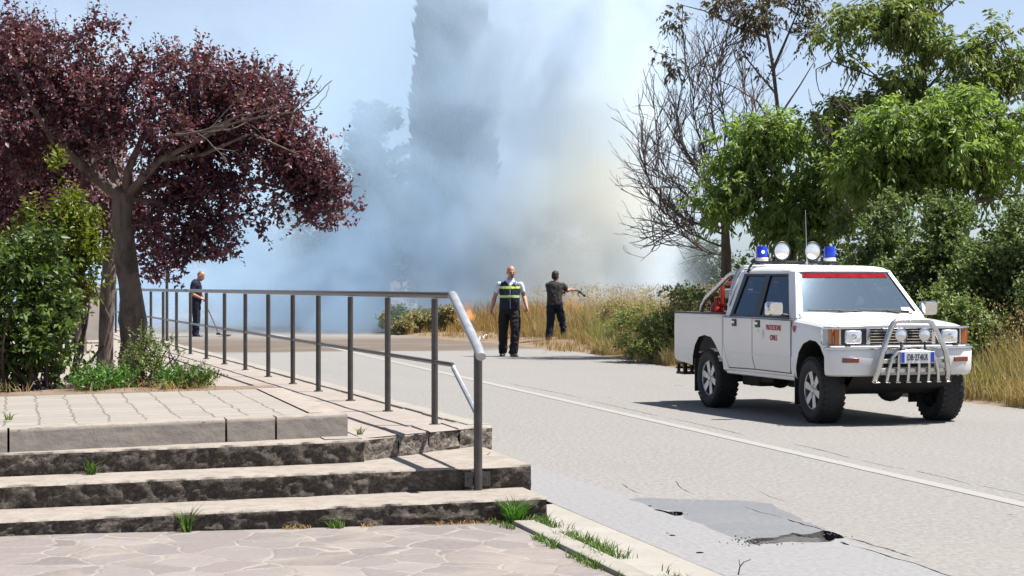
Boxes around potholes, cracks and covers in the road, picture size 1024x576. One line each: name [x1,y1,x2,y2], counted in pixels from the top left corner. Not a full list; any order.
pothole [746,530,844,545]
crack [788,519,950,576]
